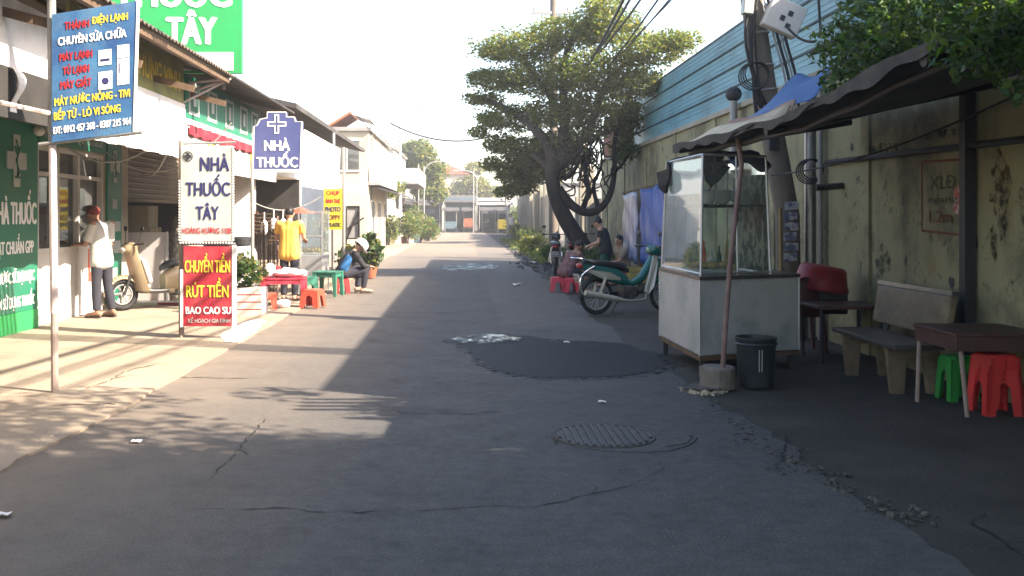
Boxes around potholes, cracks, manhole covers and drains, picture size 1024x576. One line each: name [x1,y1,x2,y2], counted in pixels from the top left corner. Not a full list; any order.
crack [770,434,790,465]
manhole cover [552,422,698,453]
crack [55,364,155,406]
crack [962,513,1020,553]
crack [211,435,693,516]
crack [209,418,265,480]
